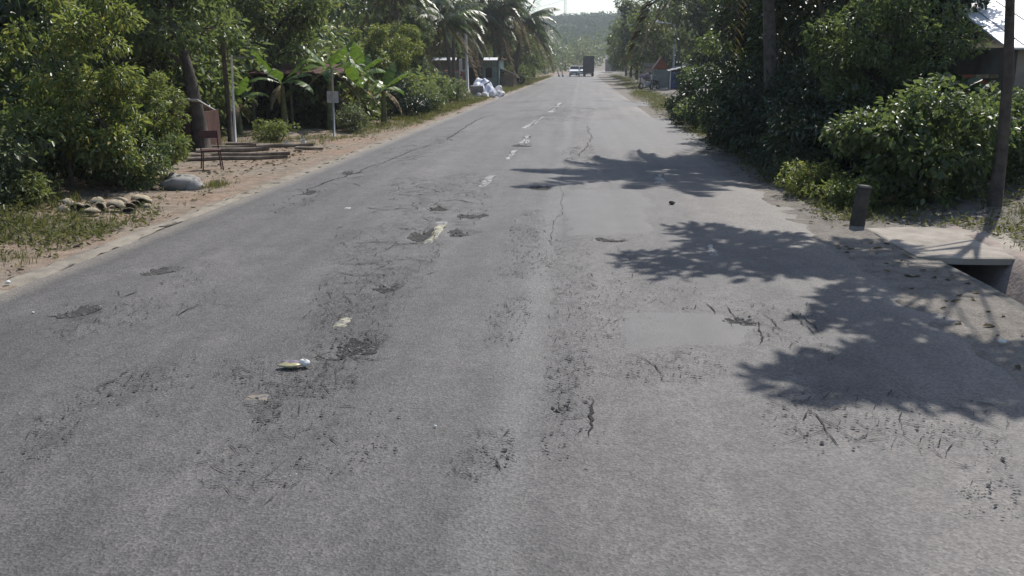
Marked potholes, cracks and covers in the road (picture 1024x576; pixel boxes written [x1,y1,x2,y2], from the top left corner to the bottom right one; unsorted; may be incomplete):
pothole [140,267,176,275]
pothole [447,228,474,237]
crack [530,397,595,433]
pothole [407,228,435,242]
crack [753,377,1024,518]
crack [483,146,854,380]
pothole [336,338,379,358]
pothole [47,304,102,318]
